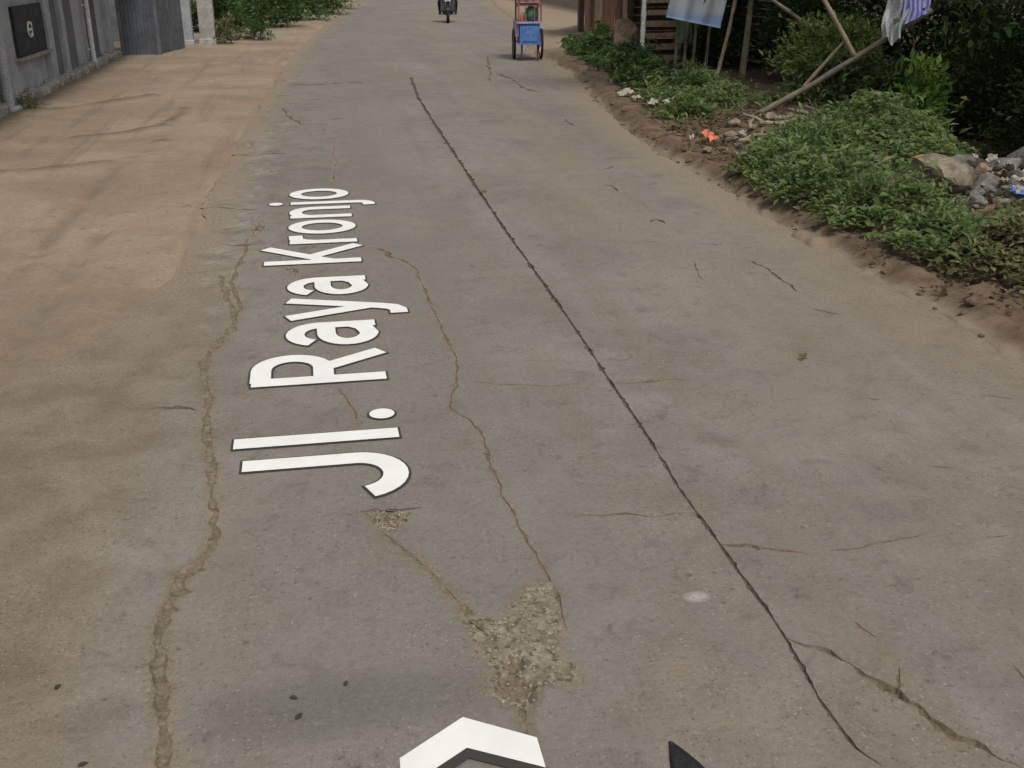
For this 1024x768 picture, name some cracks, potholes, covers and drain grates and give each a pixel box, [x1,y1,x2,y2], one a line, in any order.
crack [137,238,251,768]
crack [486,56,538,92]
pothole [462,580,580,711]
crack [743,259,797,292]
crack [516,702,528,735]
crack [720,535,920,553]
crack [785,621,1024,768]
crack [372,246,686,630]
pothole [366,509,414,532]
